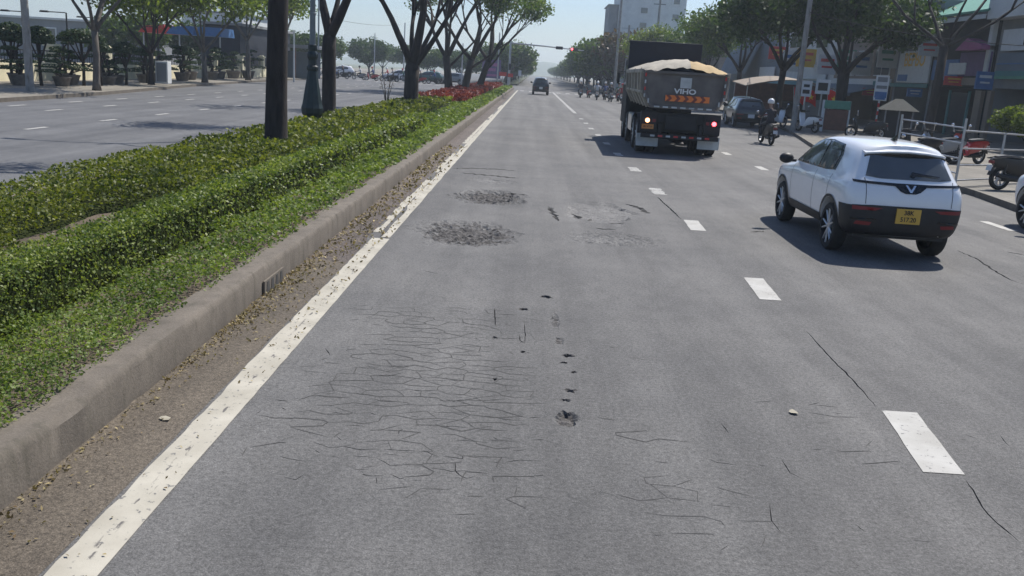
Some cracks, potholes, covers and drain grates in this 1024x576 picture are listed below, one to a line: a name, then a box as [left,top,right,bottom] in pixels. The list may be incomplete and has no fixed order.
pothole [440,189,530,206]
pothole [402,218,526,247]
crack [957,250,1022,284]
crack [242,305,543,509]
pothole [551,410,582,429]
crack [621,461,750,550]
drain grate [263,267,284,296]
